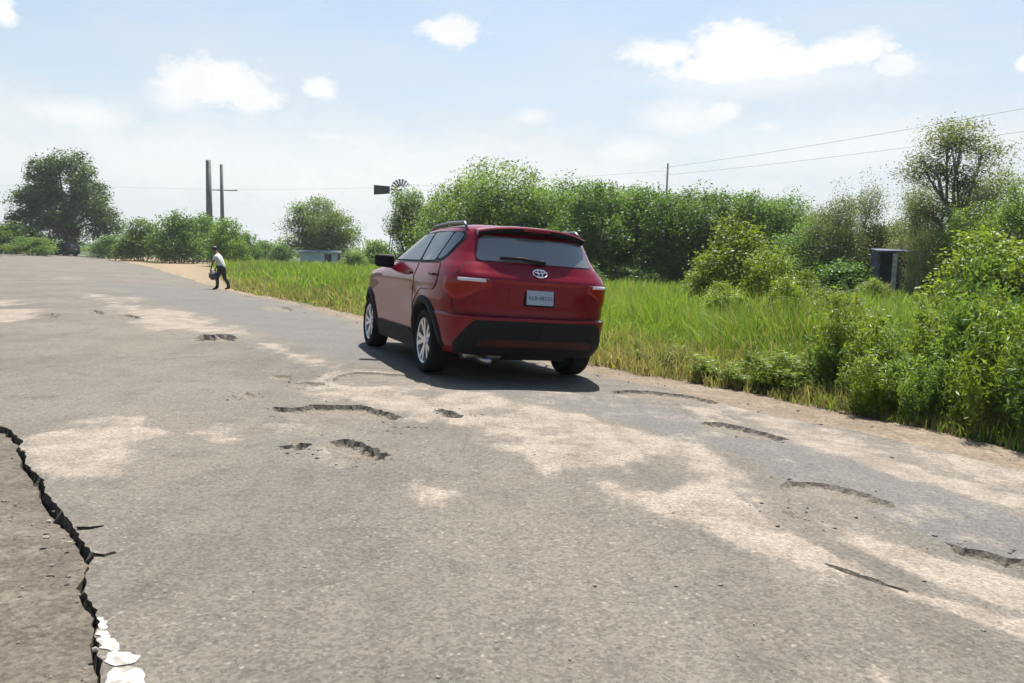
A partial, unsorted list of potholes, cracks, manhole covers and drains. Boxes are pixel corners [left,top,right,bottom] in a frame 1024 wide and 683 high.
crack [0,254,116,683]
pothole [778,480,896,508]
crack [824,563,909,593]
pothole [272,404,403,426]
pothole [699,422,790,442]
pothole [324,439,391,462]
pothole [277,443,313,451]
pothole [945,542,1024,572]
pothole [431,409,464,418]
pothole [611,390,718,405]
